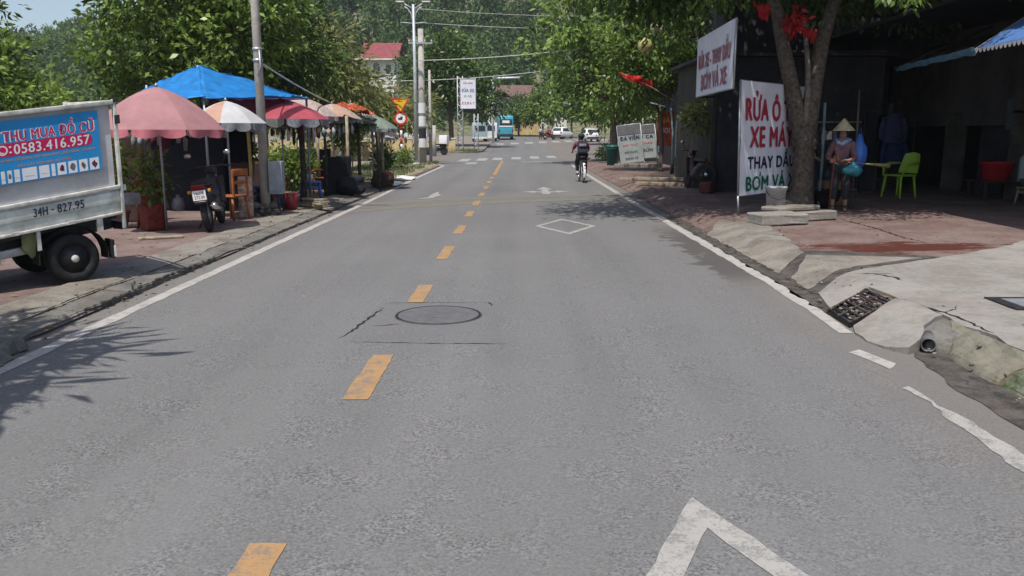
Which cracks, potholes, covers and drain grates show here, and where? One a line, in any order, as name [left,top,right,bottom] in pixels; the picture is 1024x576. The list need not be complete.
manhole cover [394,305,482,325]
crack [905,299,990,332]
crack [339,302,504,344]
drain grate [827,288,891,328]
